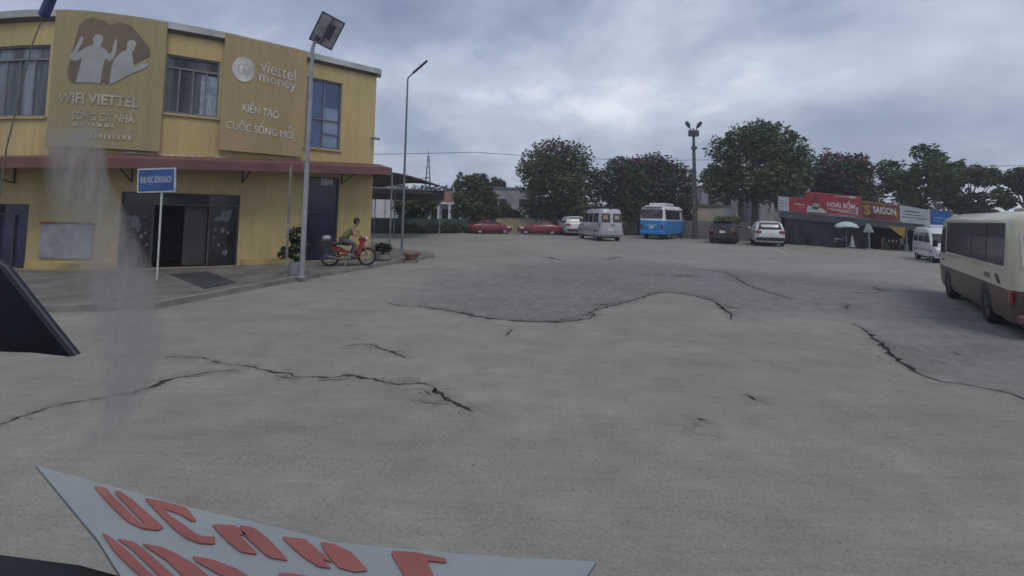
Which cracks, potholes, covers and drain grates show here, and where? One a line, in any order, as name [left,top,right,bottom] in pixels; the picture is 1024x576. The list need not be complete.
crack [389,270,789,336]
crack [845,305,1024,400]
crack [0,344,471,425]
